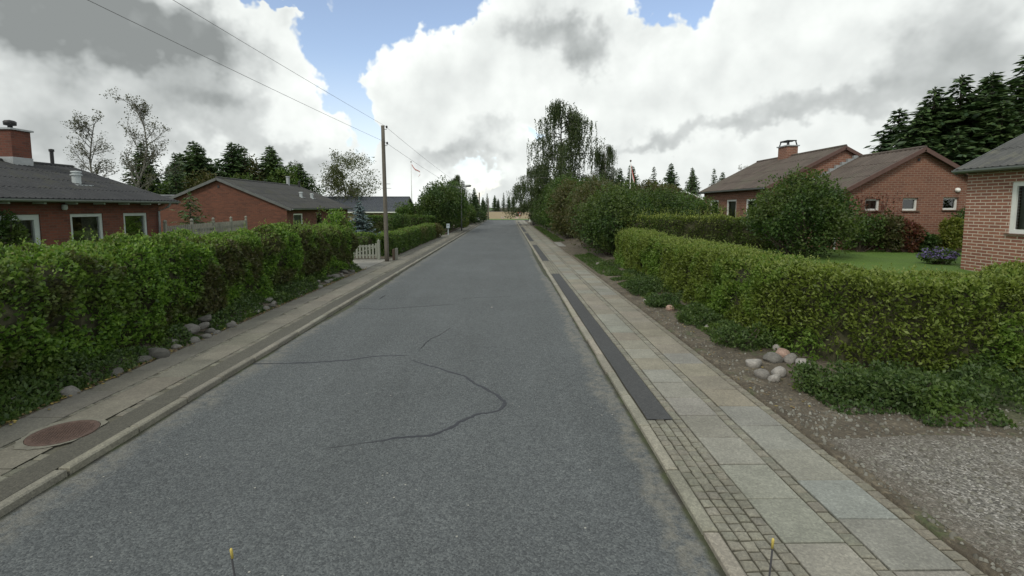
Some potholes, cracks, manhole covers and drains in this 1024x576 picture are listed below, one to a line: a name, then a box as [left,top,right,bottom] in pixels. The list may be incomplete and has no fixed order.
manhole cover [13,418,108,450]
